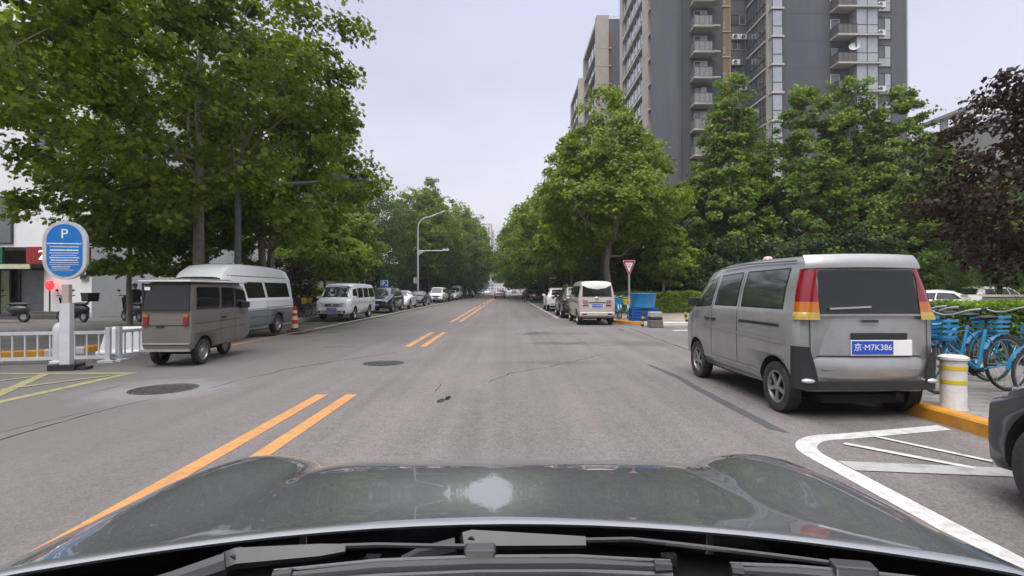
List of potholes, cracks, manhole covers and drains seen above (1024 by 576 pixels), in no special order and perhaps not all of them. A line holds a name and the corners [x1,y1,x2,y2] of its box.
manhole cover [126,383,199,395]
crack [490,331,608,381]
